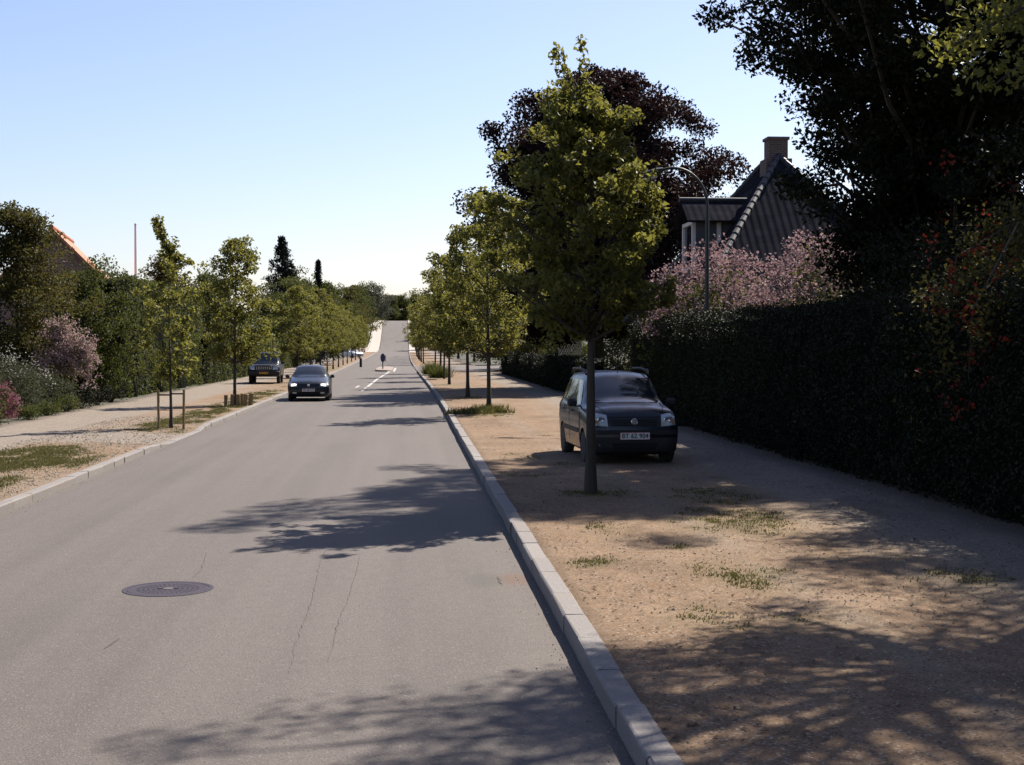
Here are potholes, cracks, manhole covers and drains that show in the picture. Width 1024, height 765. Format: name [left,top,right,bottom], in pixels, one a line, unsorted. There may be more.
manhole cover [122,581,214,597]
crack [289,546,328,668]
